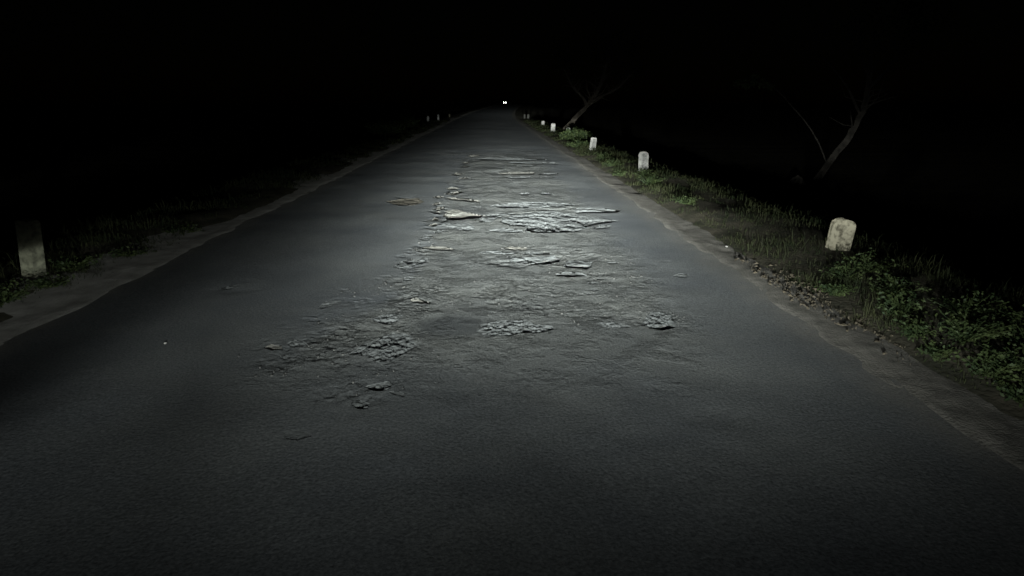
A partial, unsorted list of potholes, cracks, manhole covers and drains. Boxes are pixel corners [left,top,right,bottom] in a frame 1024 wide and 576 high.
pothole [386,198,423,206]
pothole [508,255,561,265]
pothole [365,381,393,391]
pothole [642,312,675,331]
pothole [477,319,554,337]
pothole [348,333,418,366]
pothole [350,400,371,409]
pothole [501,211,616,233]
pothole [443,210,486,221]
